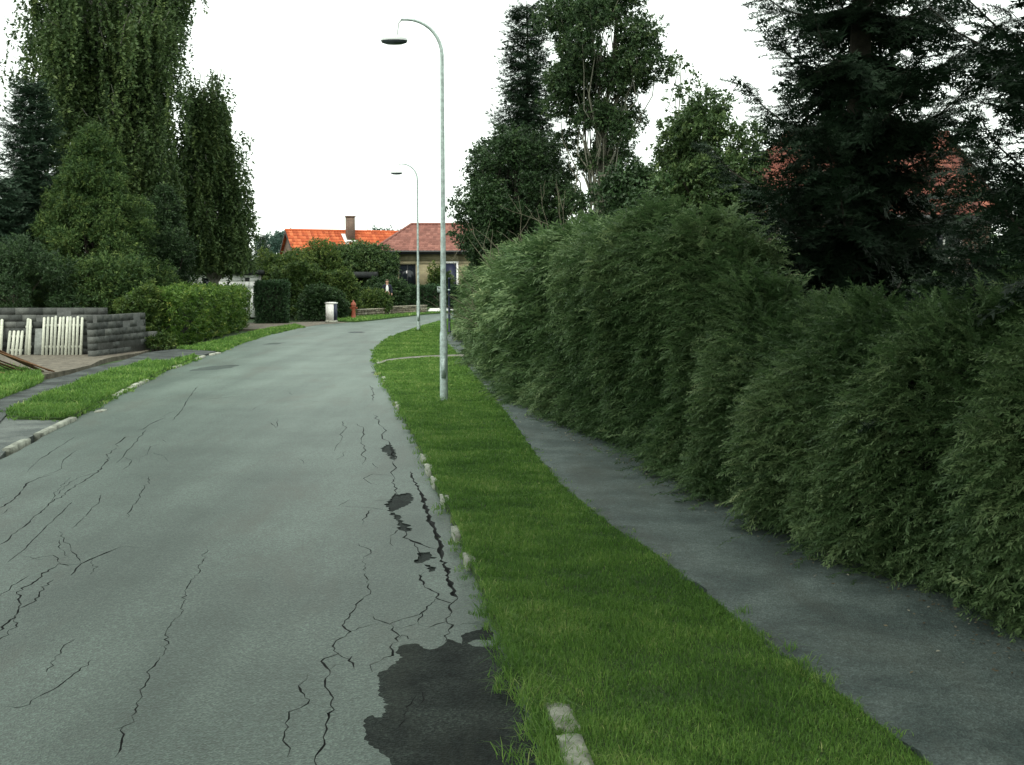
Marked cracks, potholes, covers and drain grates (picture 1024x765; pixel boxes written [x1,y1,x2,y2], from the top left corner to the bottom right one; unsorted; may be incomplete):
crack [0,388,196,639]
crack [2,640,91,708]
crack [334,413,480,672]
crack [282,545,372,765]
crack [398,687,474,737]
crack [115,550,209,757]
